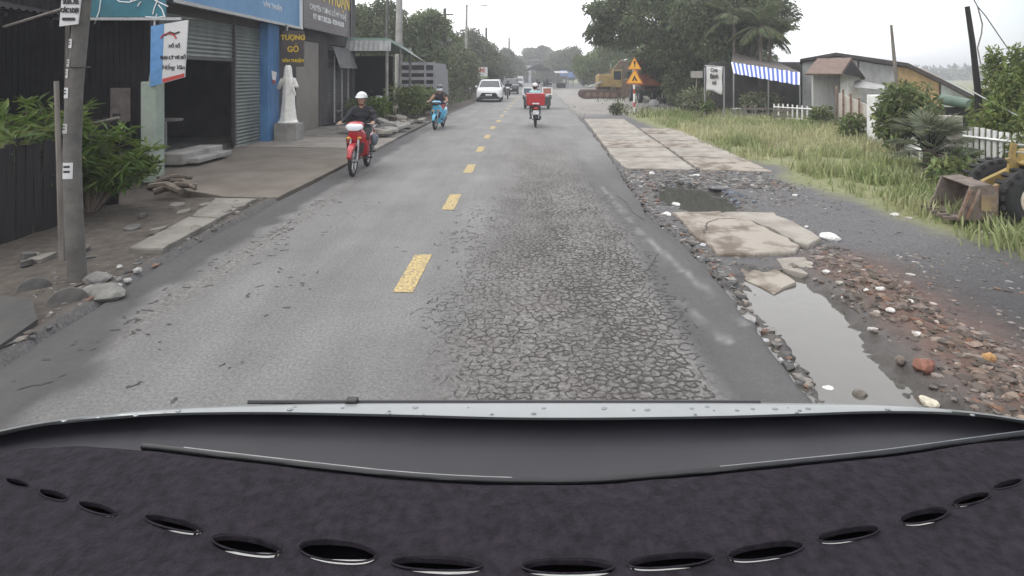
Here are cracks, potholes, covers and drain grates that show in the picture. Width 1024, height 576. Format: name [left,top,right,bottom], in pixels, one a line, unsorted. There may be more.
crack [11,358,66,390]
crack [410,142,715,400]
